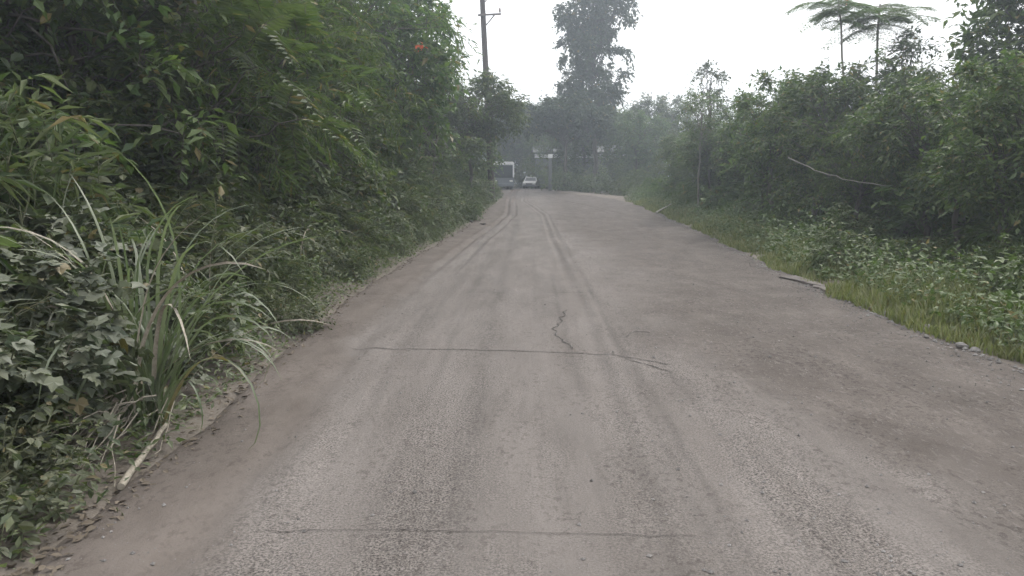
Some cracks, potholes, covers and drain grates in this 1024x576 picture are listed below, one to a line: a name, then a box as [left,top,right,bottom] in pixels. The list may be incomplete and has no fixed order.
crack [352,310,726,372]
